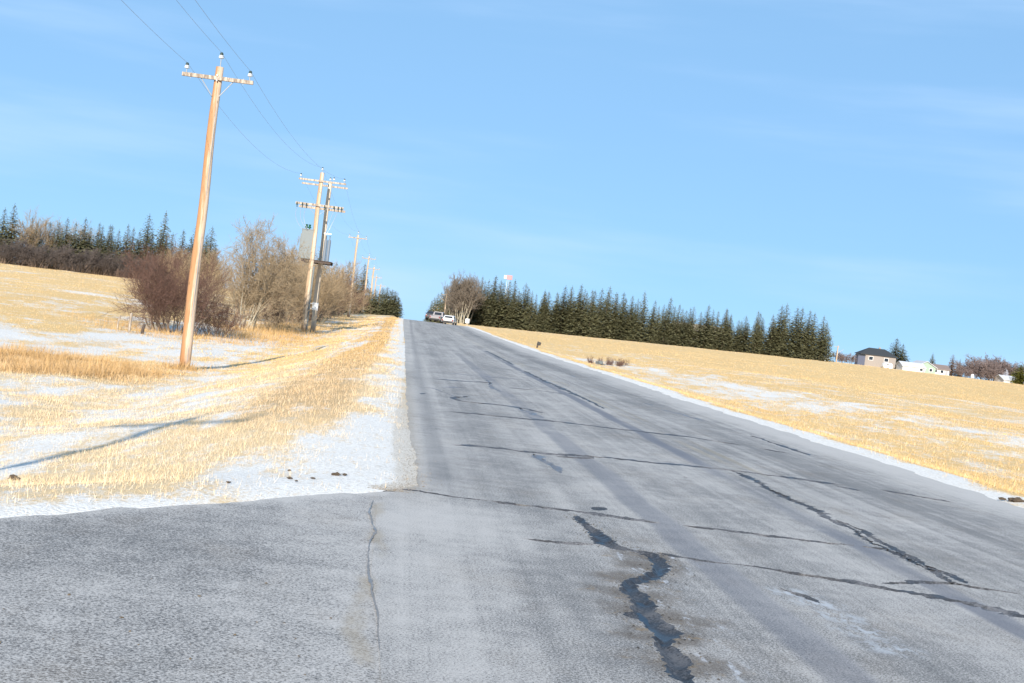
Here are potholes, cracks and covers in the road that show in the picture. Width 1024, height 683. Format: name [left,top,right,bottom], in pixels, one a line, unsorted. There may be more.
crack [383,351,1024,618]
